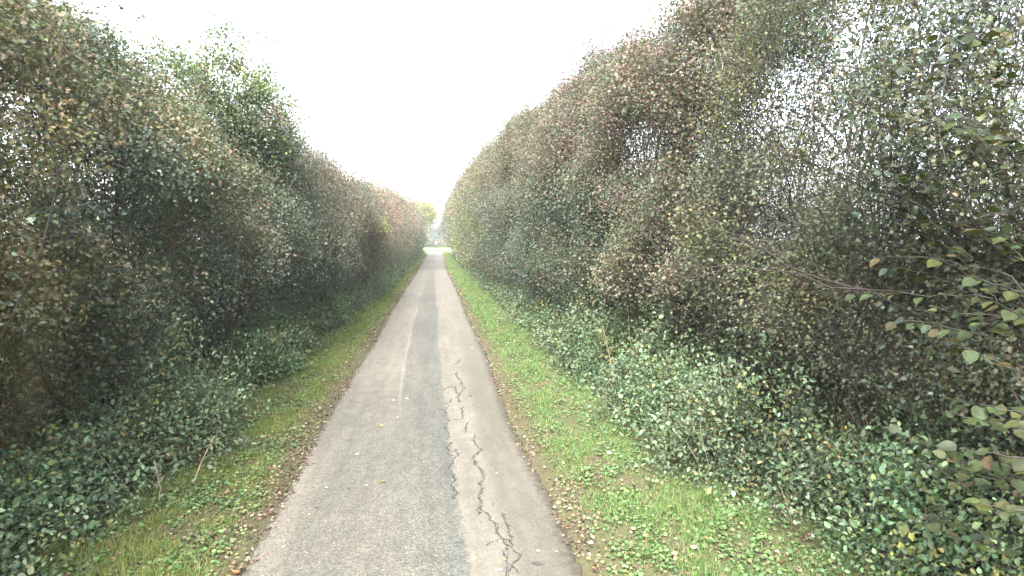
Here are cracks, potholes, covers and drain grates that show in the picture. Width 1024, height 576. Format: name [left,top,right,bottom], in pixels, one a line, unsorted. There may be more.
crack [443,359,522,576]
